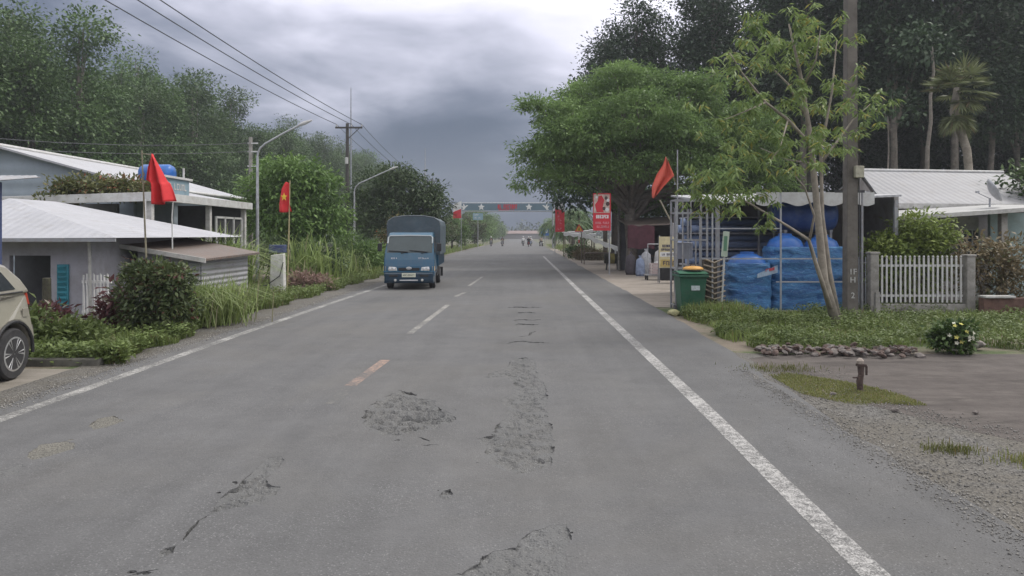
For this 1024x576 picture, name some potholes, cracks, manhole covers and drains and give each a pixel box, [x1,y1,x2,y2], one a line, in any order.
pothole [361,390,456,441]
pothole [476,357,566,474]
crack [506,307,544,344]
crack [127,515,208,576]
pothole [455,524,579,576]
